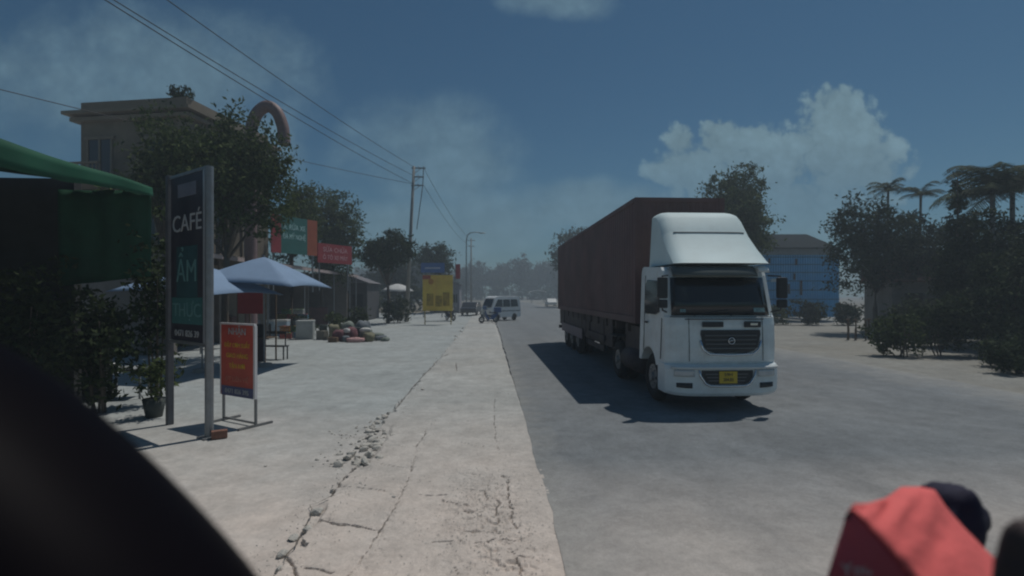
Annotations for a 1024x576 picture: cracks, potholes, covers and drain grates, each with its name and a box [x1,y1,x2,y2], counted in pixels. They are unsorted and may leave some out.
crack [284,465,359,576]
